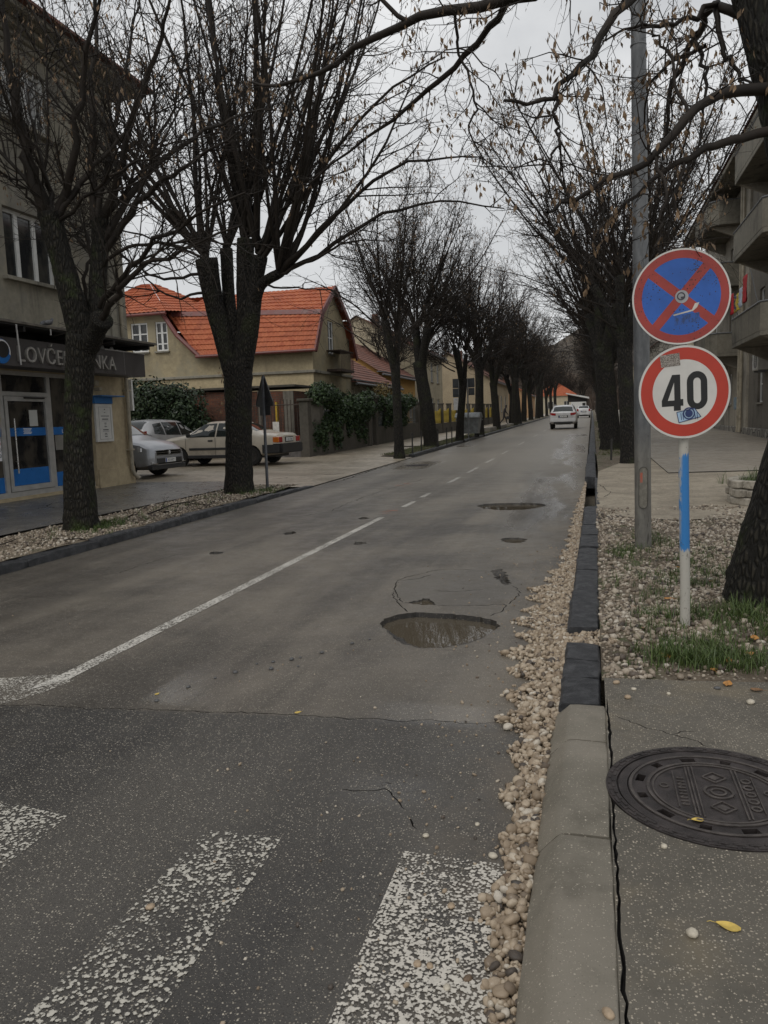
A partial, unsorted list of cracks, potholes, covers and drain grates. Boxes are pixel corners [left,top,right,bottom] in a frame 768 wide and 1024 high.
crack [341,782,417,829]
manhole cover [606,747,768,853]
pothole [491,569,511,585]
crack [614,715,708,747]
crack [392,569,521,616]
pothole [380,612,500,648]
